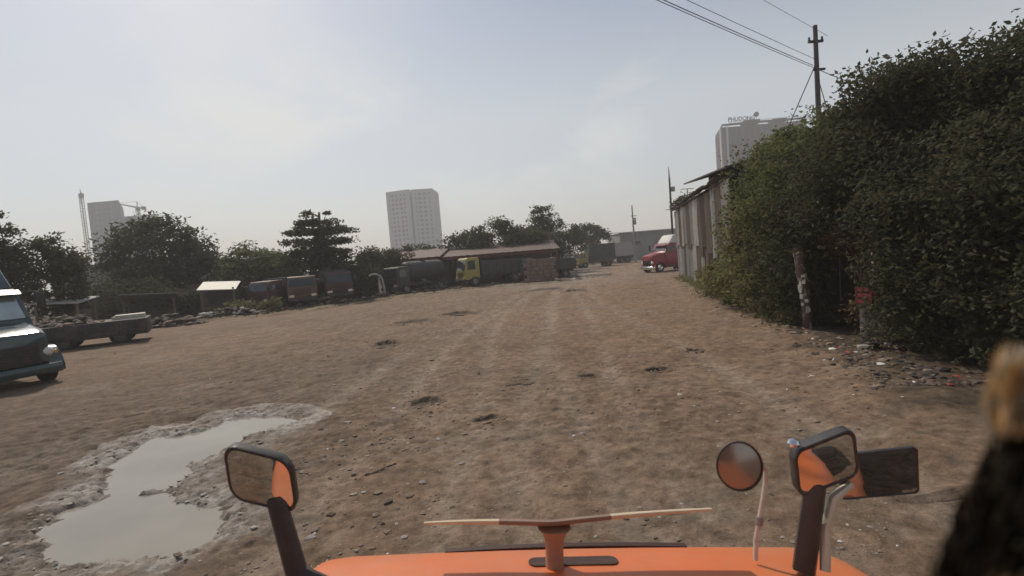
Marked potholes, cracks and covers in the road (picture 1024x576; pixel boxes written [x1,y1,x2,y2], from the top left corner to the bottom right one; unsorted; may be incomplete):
pothole [403,395,448,410]
pothole [388,318,441,326]
pothole [0,402,332,576]
pothole [636,365,676,375]
pothole [369,339,403,349]
pothole [465,413,508,426]
